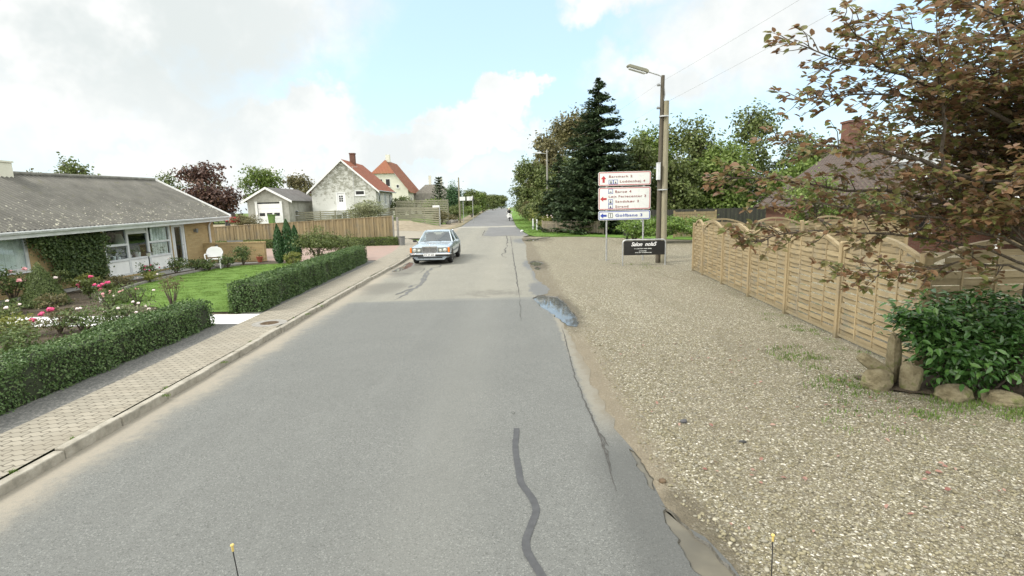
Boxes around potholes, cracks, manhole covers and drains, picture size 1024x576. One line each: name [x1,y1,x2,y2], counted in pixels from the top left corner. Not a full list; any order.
pothole [532,295,579,327]
crack [501,236,521,317]
crack [561,327,616,488]
manhole cover [251,319,287,327]
